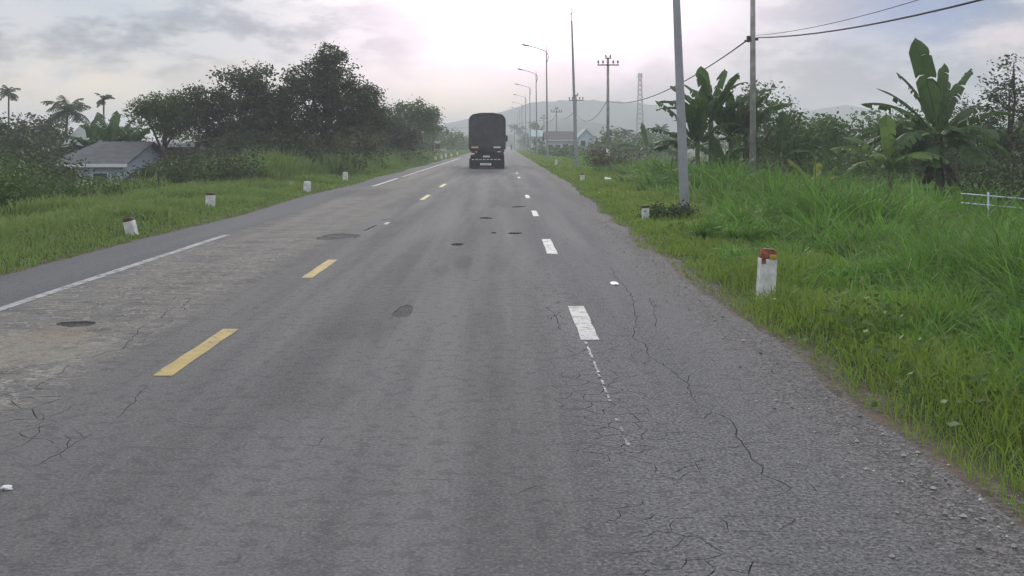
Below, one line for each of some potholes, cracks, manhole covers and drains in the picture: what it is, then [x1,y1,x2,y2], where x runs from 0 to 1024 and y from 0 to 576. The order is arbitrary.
crack [608,501,796,576]
crack [553,267,791,498]
crack [534,284,571,329]
crack [85,297,195,359]
pothole [392,305,413,318]
crack [0,364,94,466]
